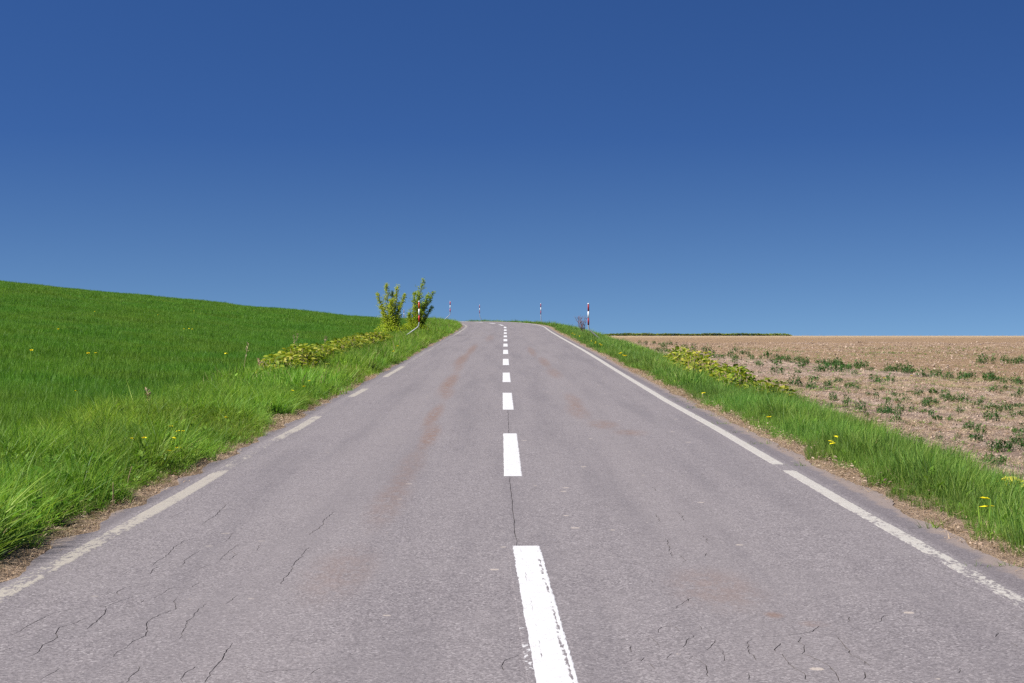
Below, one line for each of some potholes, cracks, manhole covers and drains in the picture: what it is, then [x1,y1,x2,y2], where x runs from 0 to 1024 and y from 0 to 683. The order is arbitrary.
crack [630,625,725,676]
crack [773,618,870,683]
crack [181,643,293,682]
crack [12,503,236,679]
